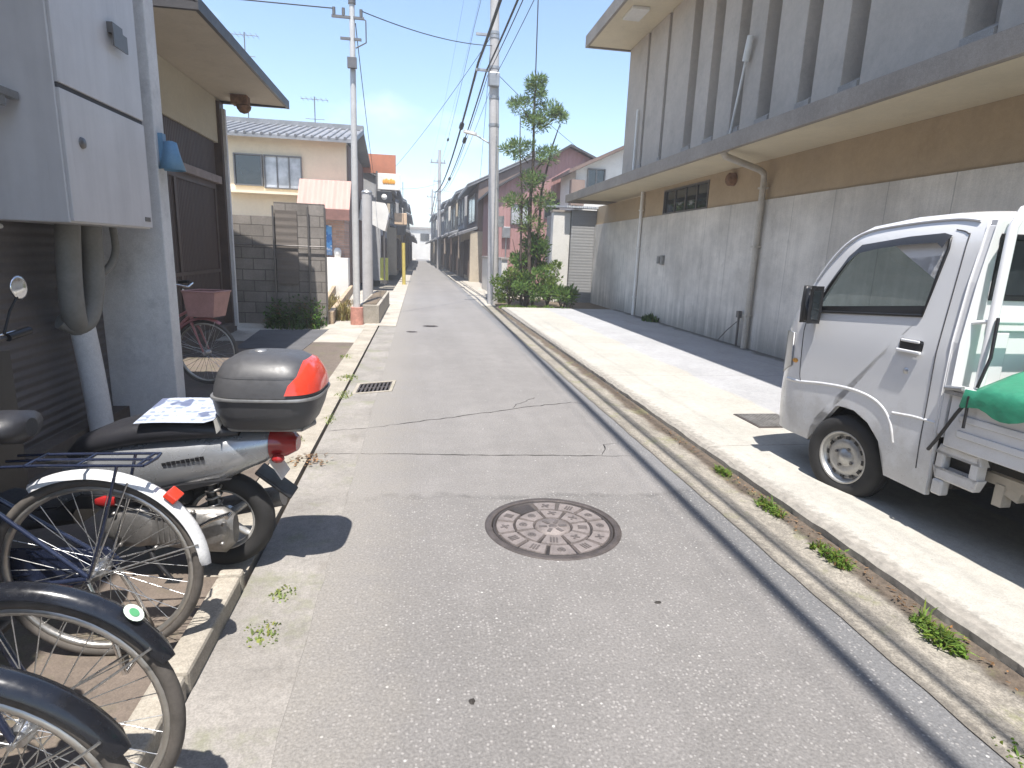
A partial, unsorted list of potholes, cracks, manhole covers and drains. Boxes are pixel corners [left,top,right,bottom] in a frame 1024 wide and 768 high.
manhole cover [485,498,622,561]
crack [334,398,580,431]
drain grate [352,380,396,394]
